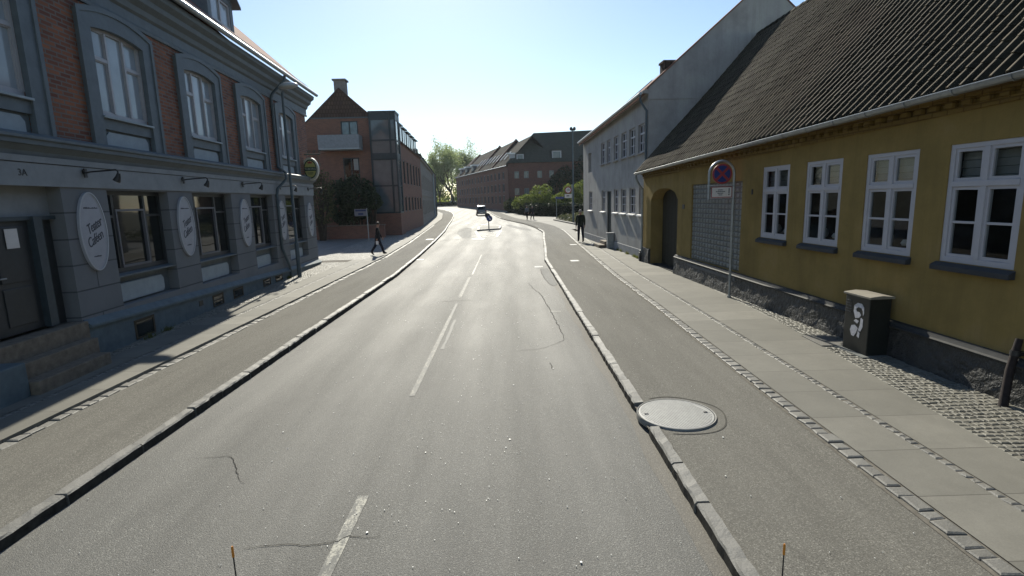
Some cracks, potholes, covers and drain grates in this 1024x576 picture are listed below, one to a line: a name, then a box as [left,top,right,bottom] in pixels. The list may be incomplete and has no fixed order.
crack [243,535,377,549]
manhole cover [636,399,717,431]
